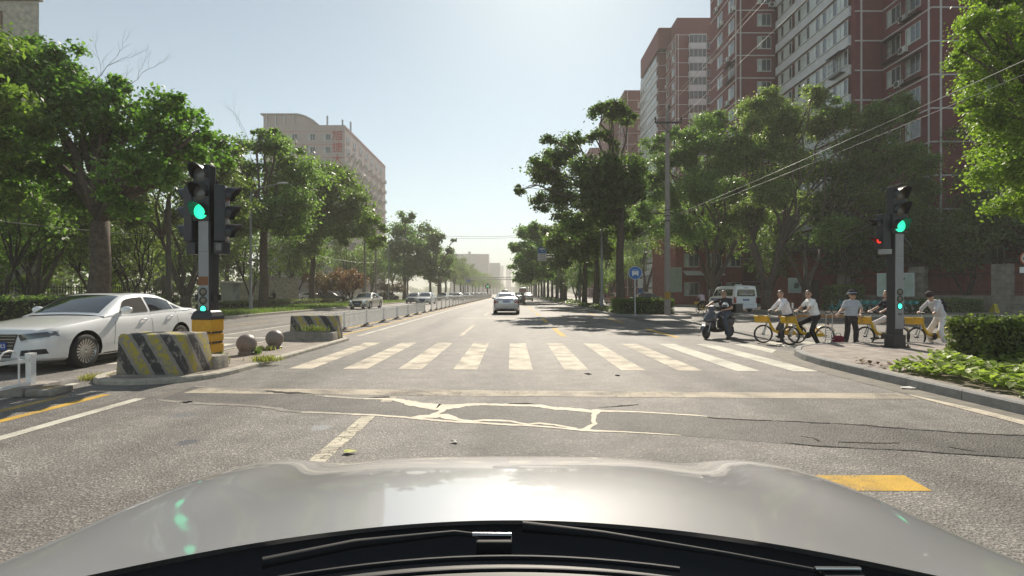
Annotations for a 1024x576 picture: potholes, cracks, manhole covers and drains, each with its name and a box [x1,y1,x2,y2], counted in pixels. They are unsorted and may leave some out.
crack [708,417,1024,458]
